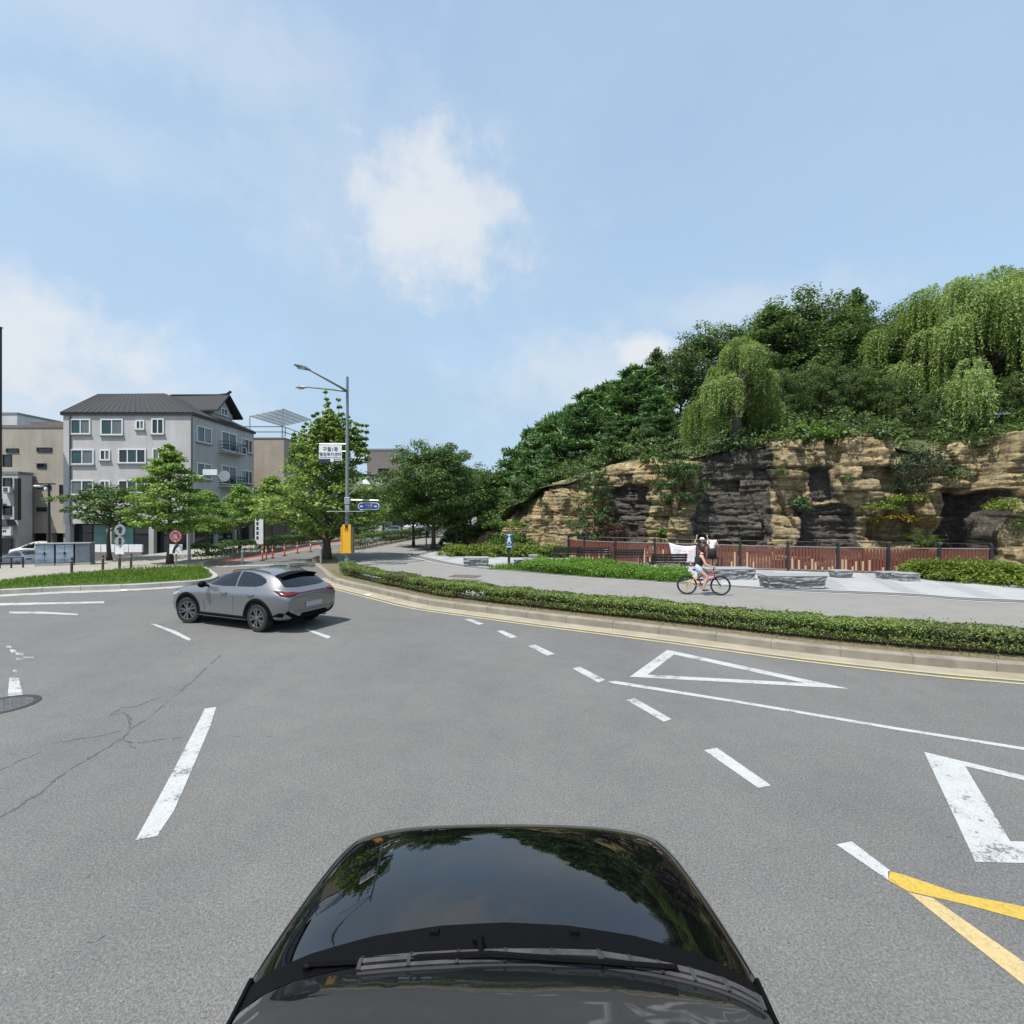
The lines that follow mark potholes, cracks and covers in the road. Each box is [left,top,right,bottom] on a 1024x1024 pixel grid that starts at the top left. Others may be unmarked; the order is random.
manhole cover [0,694,42,714]
crack [0,655,234,817]
